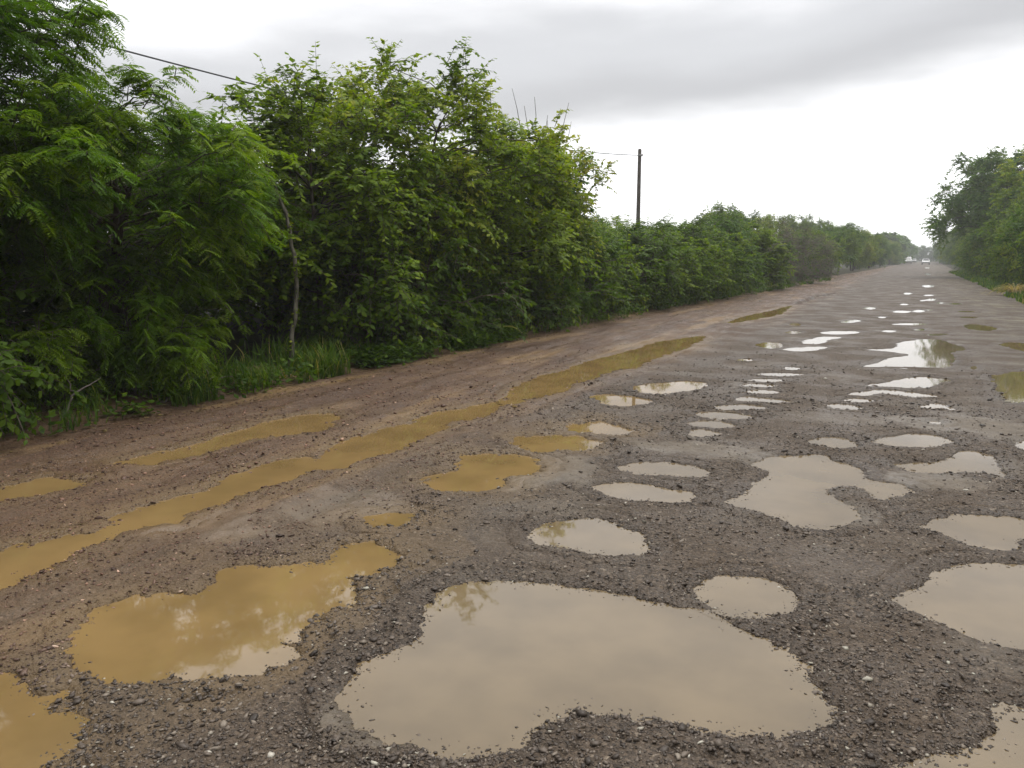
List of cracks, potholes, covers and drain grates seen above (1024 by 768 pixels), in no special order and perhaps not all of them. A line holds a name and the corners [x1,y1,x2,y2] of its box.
pothole [860,429,975,452]
pothole [0,396,514,602]
pothole [601,456,734,483]
pothole [874,446,1024,483]
pothole [706,449,939,538]
pothole [303,568,882,768]
pothole [0,654,120,768]
pothole [491,335,714,409]
pothole [895,505,1024,555]
pothole [834,683,1024,768]
pothole [35,533,441,704]
pothole [397,447,563,498]
